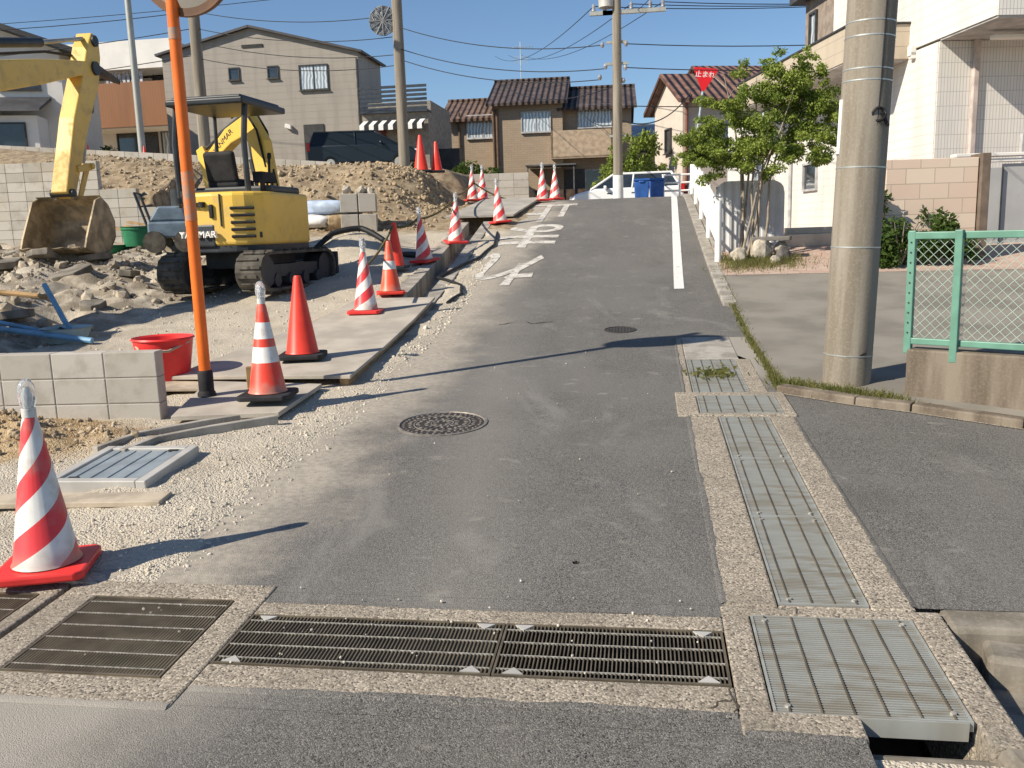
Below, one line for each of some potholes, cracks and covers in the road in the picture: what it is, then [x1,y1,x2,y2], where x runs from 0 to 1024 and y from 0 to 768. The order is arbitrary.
drain grate [686,359,750,392]
drain grate [750,615,974,742]
drain grate [696,395,784,413]
drain grate [210,614,506,676]
drain grate [491,623,732,687]
drain grate [719,417,791,461]
manhole cover [397,411,488,436]
drain grate [751,516,869,608]
drain grate [0,592,39,622]
drain grate [732,458,822,521]
